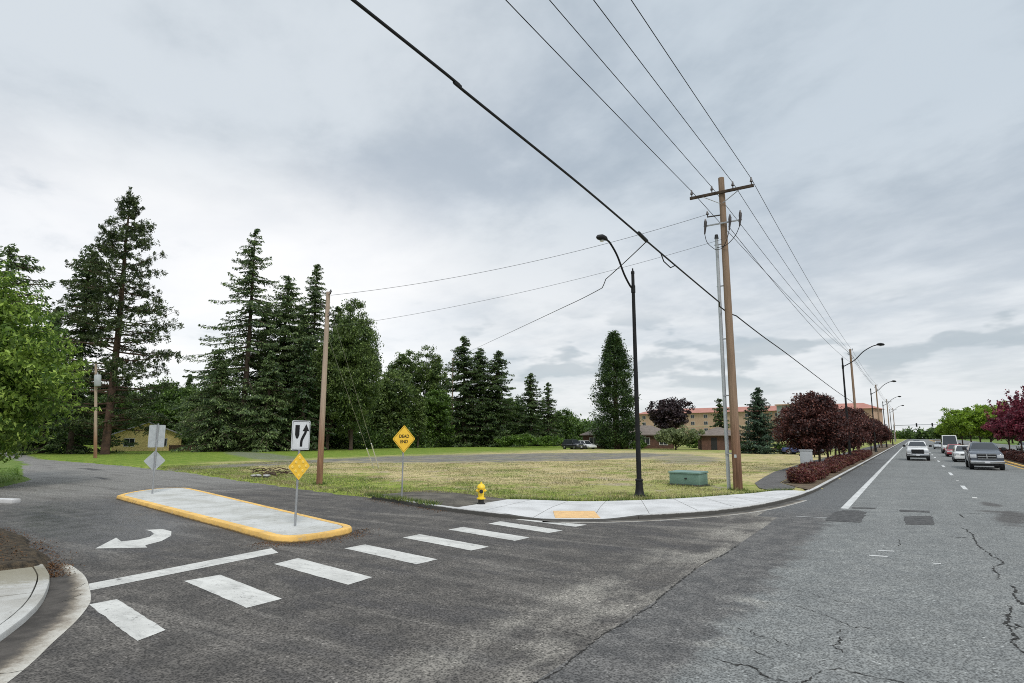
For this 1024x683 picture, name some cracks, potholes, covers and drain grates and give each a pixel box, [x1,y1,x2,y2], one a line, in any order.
crack [716,591,904,683]
crack [960,513,1024,652]
